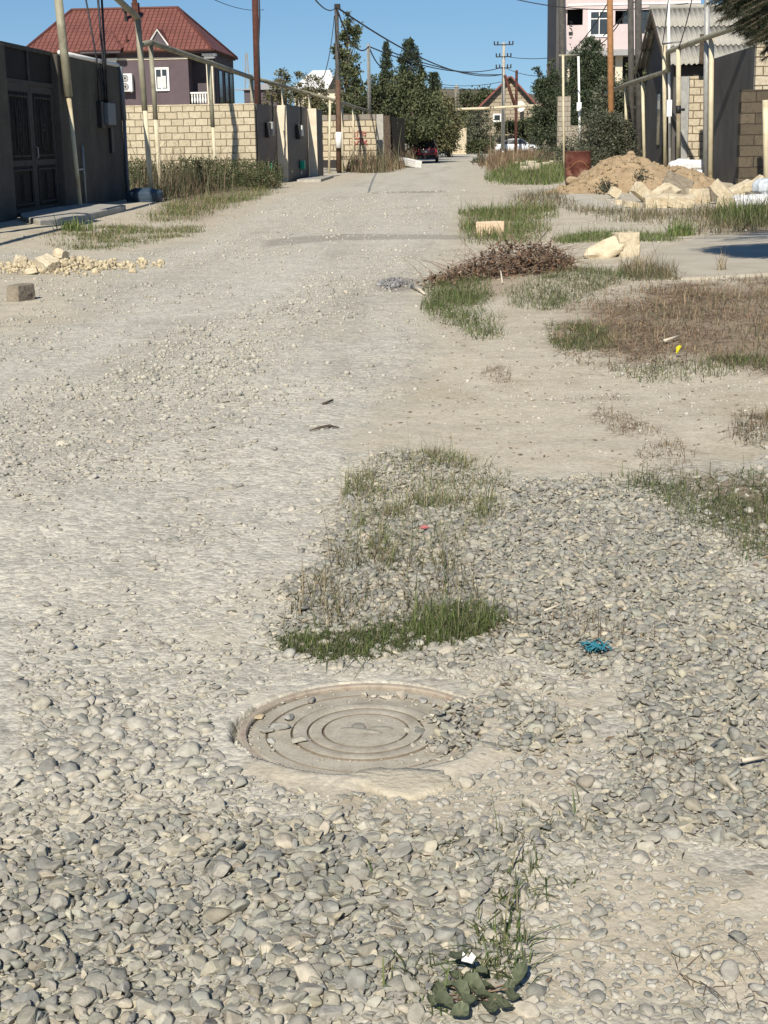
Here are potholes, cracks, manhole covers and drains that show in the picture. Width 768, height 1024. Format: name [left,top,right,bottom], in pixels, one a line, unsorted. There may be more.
manhole cover [238,683,484,774]
